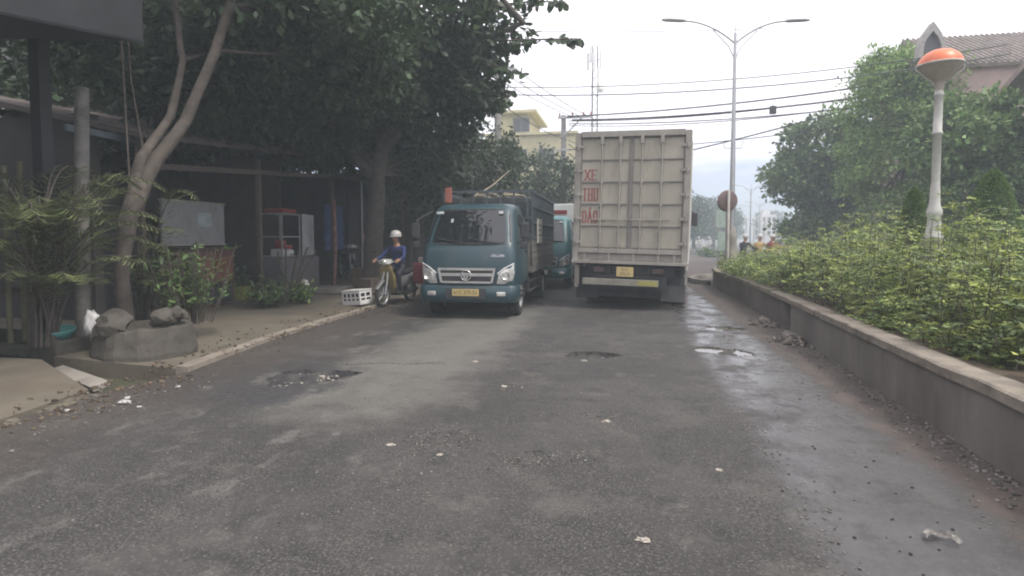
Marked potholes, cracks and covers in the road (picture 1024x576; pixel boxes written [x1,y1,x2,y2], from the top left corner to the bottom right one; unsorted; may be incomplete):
pothole [689,346,754,356]
pothole [265,369,363,387]
